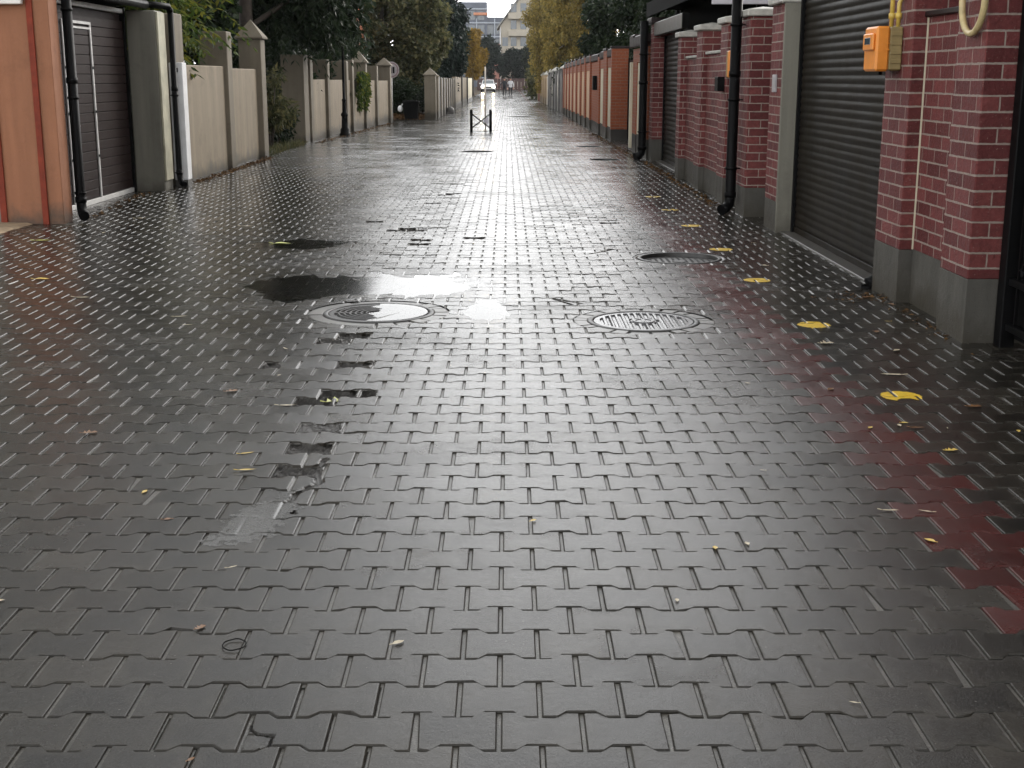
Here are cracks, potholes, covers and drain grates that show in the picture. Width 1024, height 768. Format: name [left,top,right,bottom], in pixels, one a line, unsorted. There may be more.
pothole [297,423,342,434]
pothole [336,361,374,369]
pothole [286,442,333,455]
crack [242,721,276,749]
pothole [316,333,372,345]
manhole cover [306,301,450,326]
pothole [293,389,358,406]
pothole [271,465,328,478]
pothole [360,389,378,398]
manhole cover [633,252,726,265]
